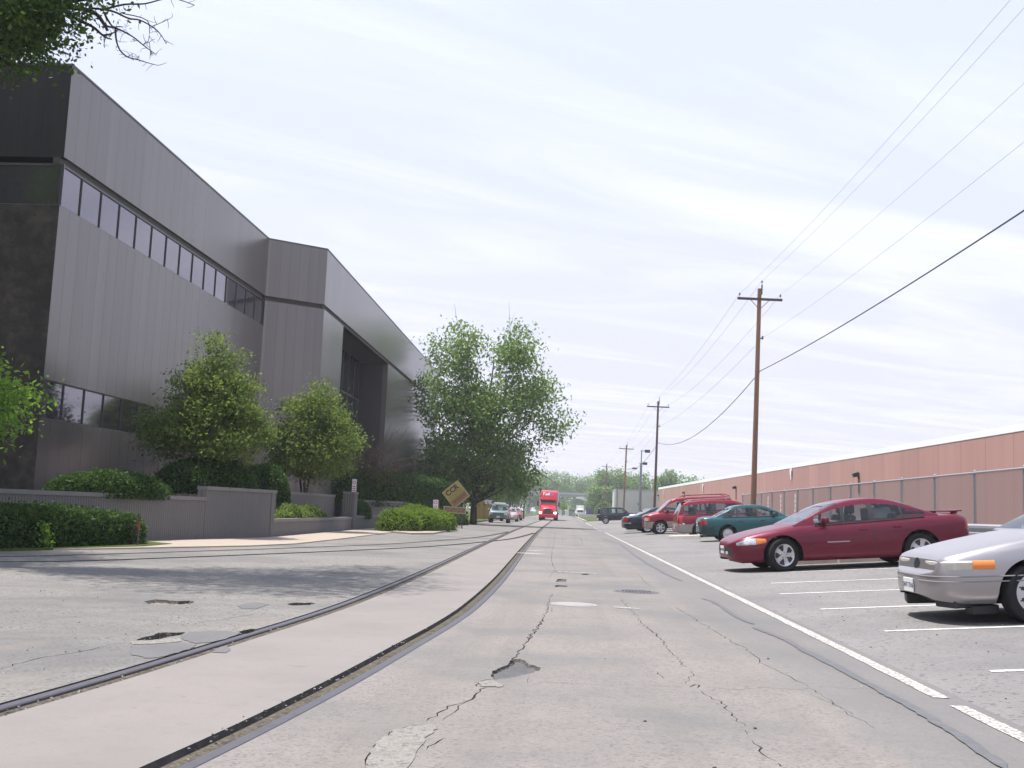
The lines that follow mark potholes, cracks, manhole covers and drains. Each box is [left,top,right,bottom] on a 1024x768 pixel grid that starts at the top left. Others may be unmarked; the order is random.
pothole [491,659,540,680]
crack [365,594,876,766]
pothole [137,632,185,640]
